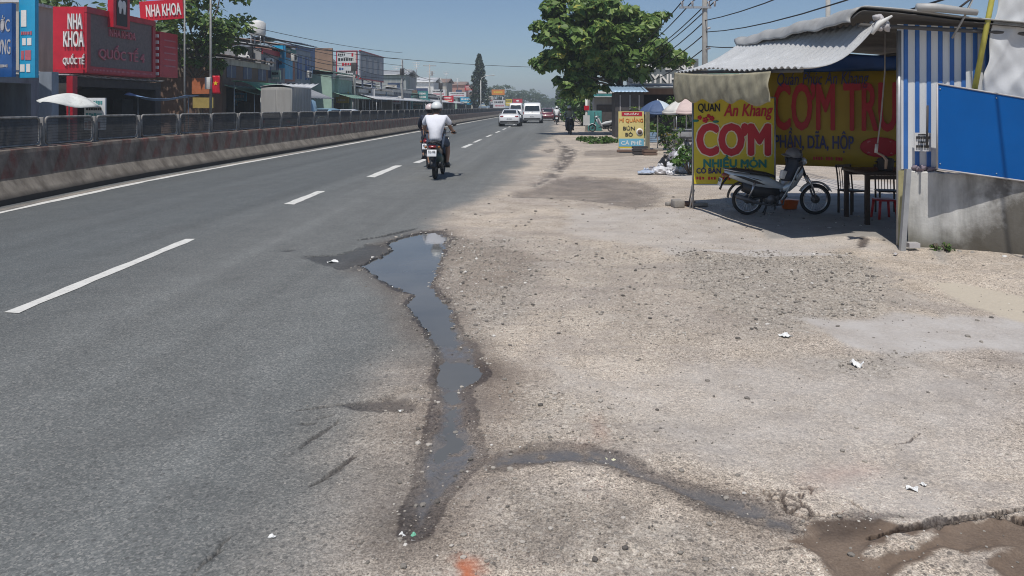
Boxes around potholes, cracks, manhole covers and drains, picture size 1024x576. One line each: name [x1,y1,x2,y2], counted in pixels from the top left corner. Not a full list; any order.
crack [294,403,358,487]
crack [190,535,235,576]
pothole [359,230,491,542]
pothole [787,514,1024,576]
crack [761,485,1024,540]
